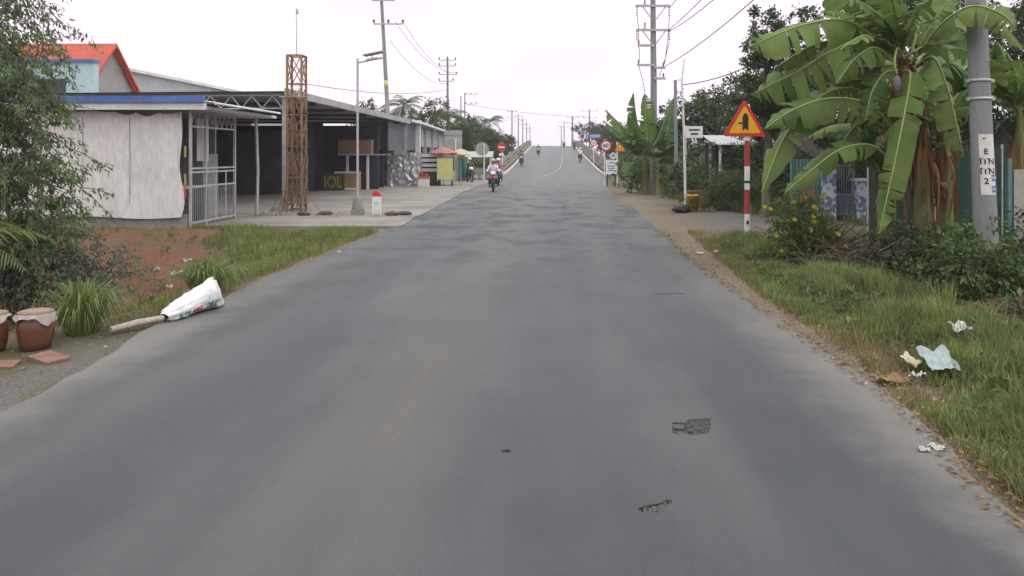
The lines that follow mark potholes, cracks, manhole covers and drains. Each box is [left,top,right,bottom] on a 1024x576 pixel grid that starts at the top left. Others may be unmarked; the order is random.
pothole [639,500,672,513]
pothole [672,418,711,435]
